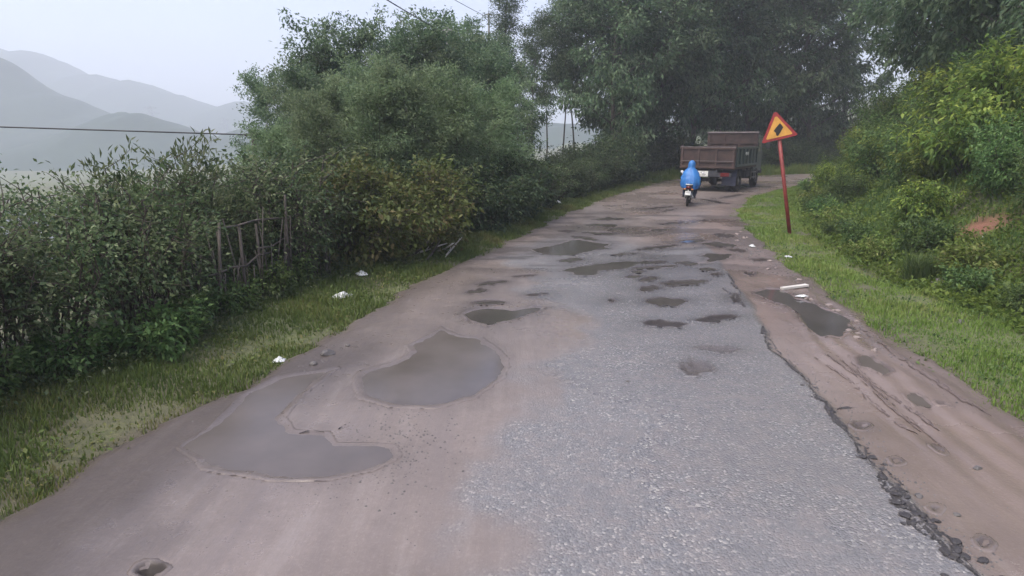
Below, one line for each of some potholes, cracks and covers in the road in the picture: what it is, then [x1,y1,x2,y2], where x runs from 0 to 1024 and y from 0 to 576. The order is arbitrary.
pothole [674,358,719,378]
pothole [847,421,874,431]
pothole [926,443,950,456]
pothole [127,558,173,576]
pothole [526,238,614,257]
pothole [751,287,859,338]
pothole [175,366,402,482]
pothole [638,319,689,328]
pothole [685,314,741,323]
pothole [351,326,512,409]
pothole [458,306,547,327]
pothole [642,296,690,308]
